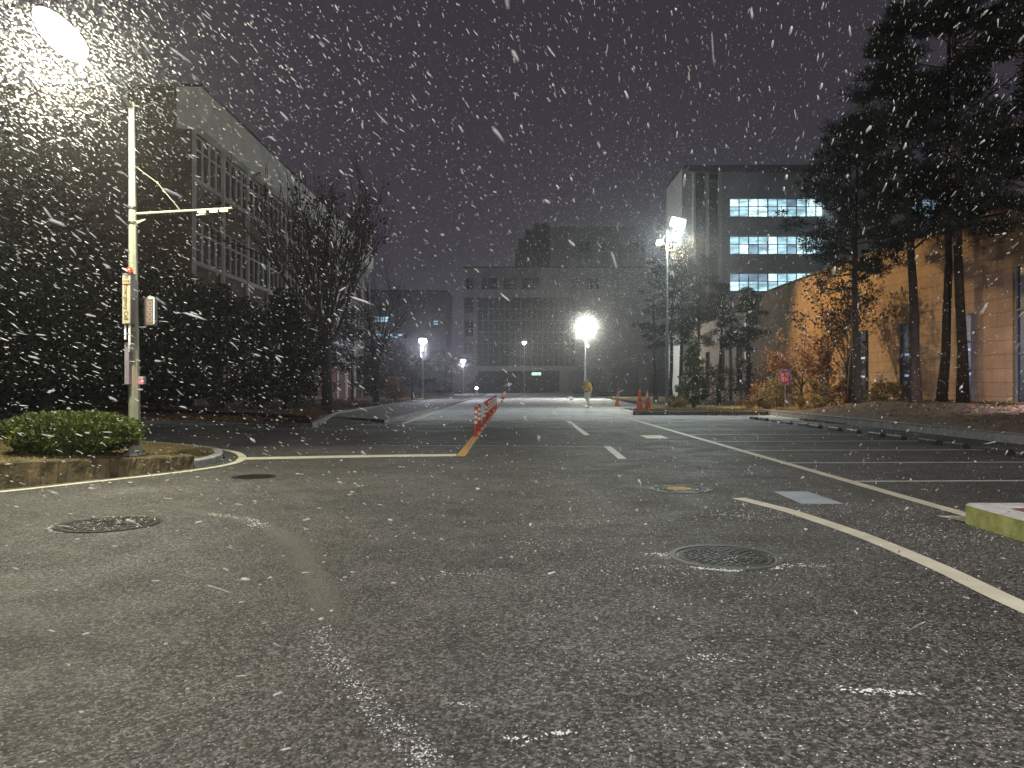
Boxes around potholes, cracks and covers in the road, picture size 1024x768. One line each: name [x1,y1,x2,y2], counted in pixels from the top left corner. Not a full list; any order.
manhole cover [52,515,163,533]
manhole cover [668,544,785,570]
manhole cover [647,484,714,494]
